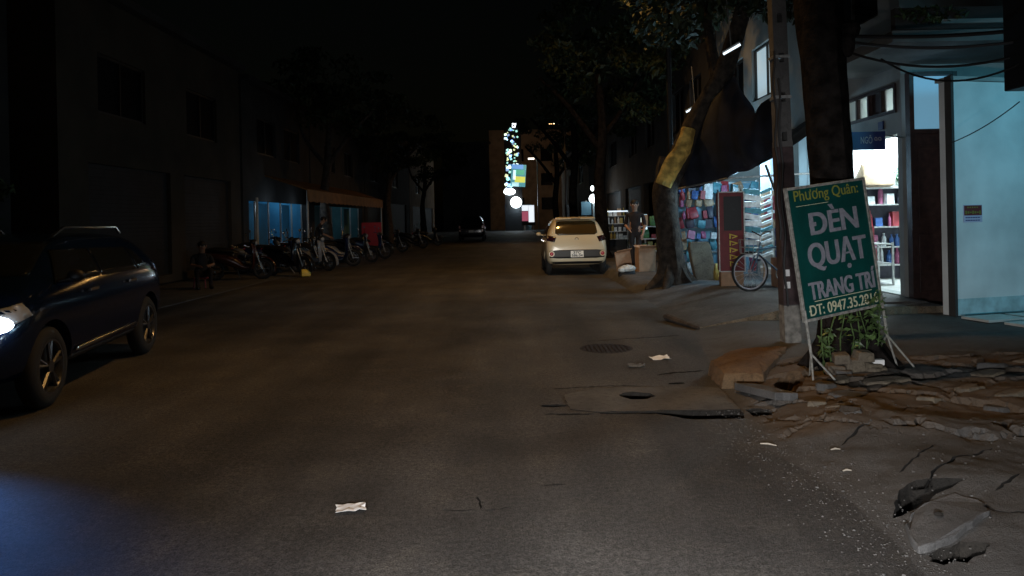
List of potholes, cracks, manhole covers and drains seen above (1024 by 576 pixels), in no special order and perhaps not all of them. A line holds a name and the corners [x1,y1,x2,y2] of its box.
crack [447,497,509,511]
manhole cover [579,344,633,353]
crack [899,443,1024,513]
crack [842,425,864,445]
pothole [774,371,805,392]
pothole [893,478,967,518]
pothole [928,541,990,565]
